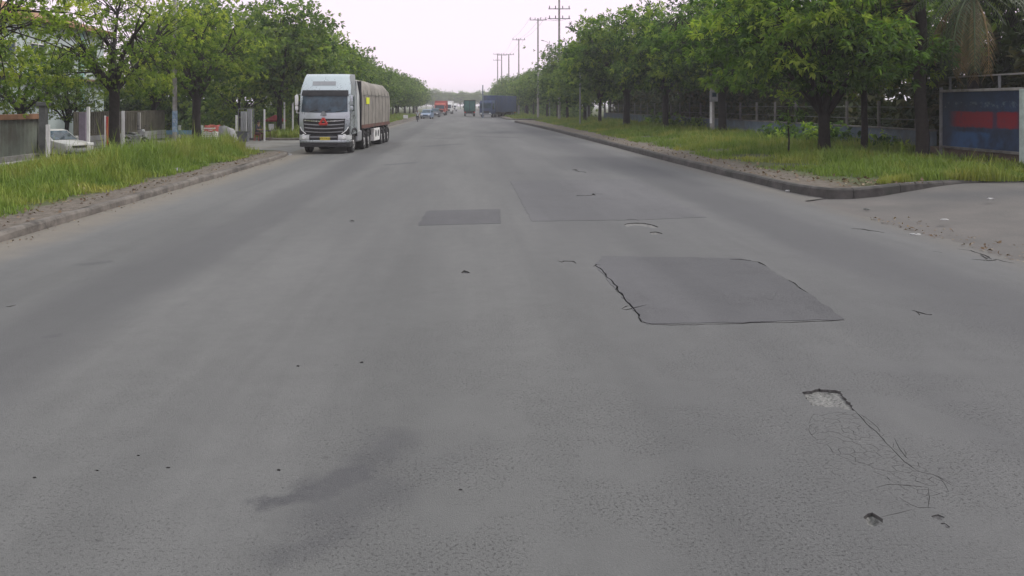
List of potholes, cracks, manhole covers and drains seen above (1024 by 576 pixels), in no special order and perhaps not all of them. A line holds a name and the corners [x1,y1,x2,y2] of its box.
crack [594,264,842,325]
pothole [863,513,883,527]
pothole [802,389,855,411]
crack [809,411,951,517]
crack [935,249,1011,263]
